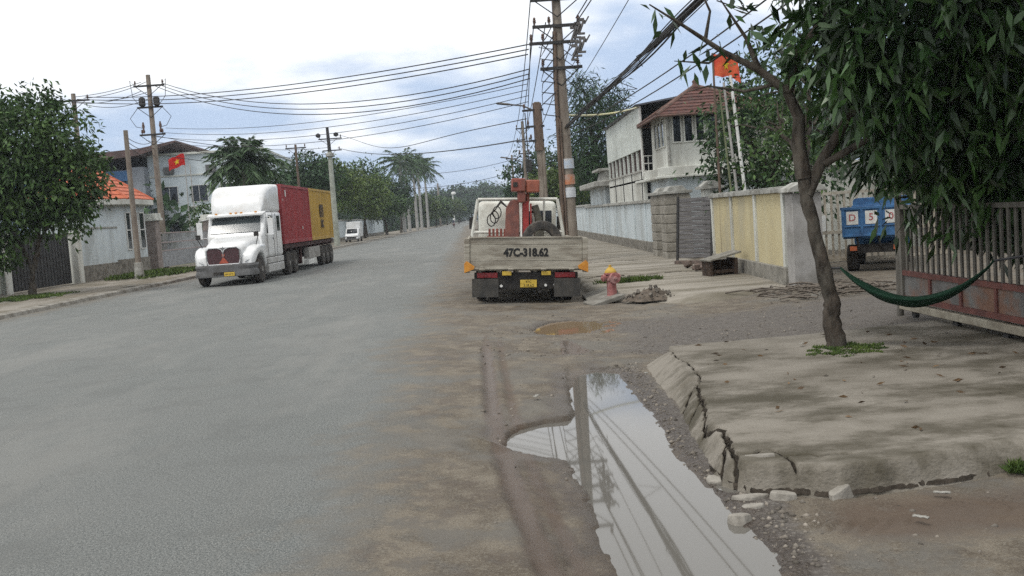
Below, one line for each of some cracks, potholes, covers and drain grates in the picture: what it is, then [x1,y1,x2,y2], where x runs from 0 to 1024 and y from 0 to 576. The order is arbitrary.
pothole [496,369,805,576]
pothole [527,320,621,335]
